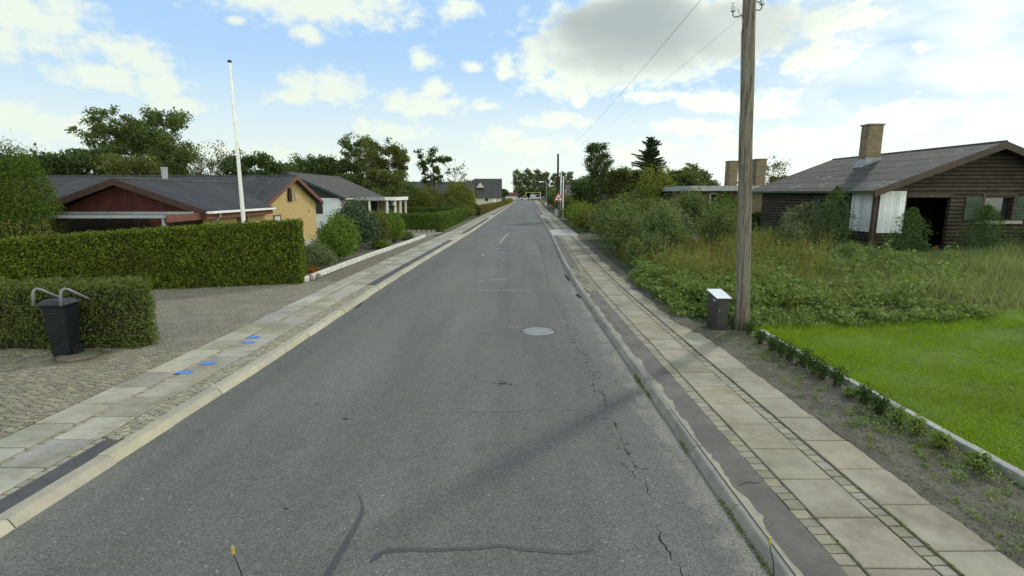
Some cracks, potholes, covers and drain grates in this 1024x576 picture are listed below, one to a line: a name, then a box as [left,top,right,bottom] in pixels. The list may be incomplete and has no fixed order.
crack [540,246,684,576]
manhole cover [43,349,114,367]
manhole cover [520,327,557,336]
